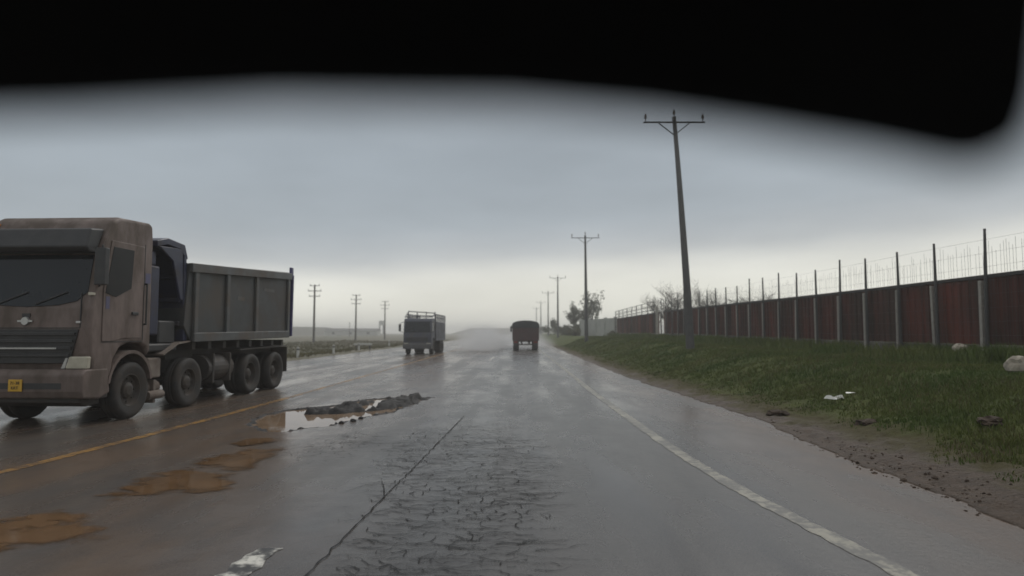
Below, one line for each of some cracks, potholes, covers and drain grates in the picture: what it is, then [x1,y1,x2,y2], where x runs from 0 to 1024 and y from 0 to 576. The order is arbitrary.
crack [291,416,594,576]
pothole [243,393,436,432]
